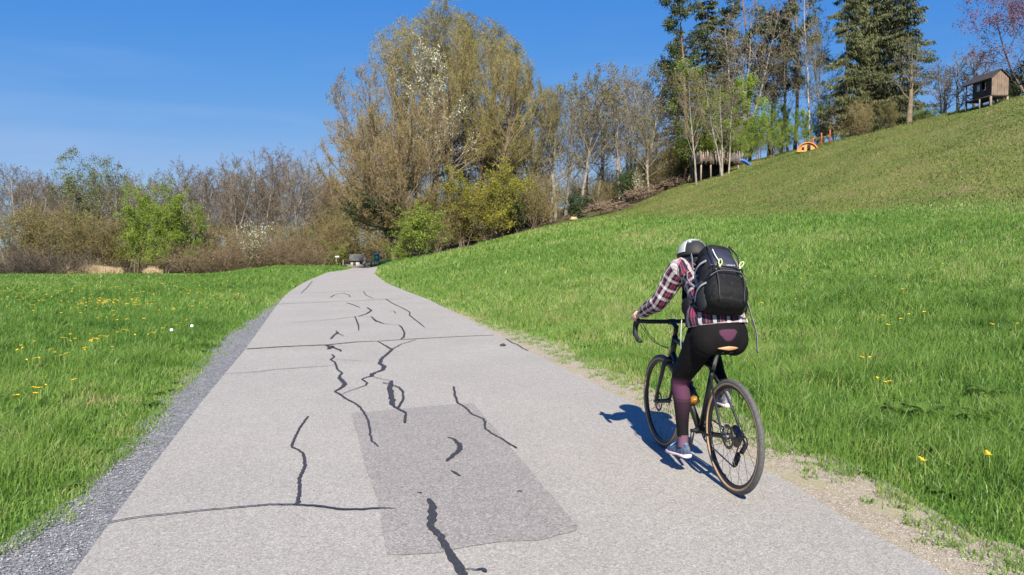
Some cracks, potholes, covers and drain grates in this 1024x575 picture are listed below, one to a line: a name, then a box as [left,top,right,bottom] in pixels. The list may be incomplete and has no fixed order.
crack [452,386,517,448]
